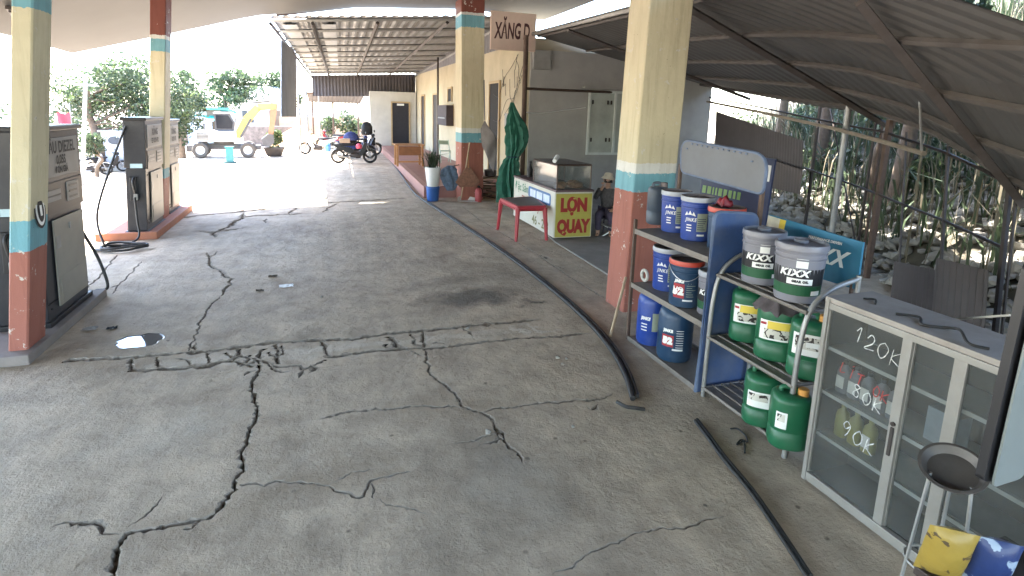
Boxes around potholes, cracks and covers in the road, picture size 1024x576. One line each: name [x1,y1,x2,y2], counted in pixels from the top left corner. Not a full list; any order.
crack [50,252,612,576]
crack [552,516,724,575]
